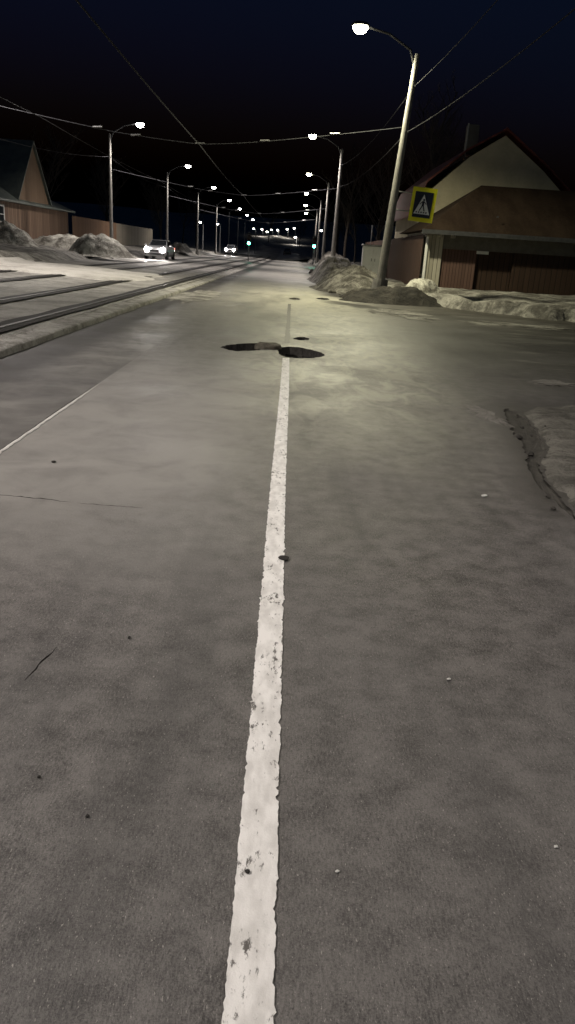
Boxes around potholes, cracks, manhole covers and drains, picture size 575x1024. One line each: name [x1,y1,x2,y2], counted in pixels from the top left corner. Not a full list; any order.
crack [24,648,56,681]
crack [7,495,137,508]
pothole [277,347,324,358]
pothole [221,343,257,351]
